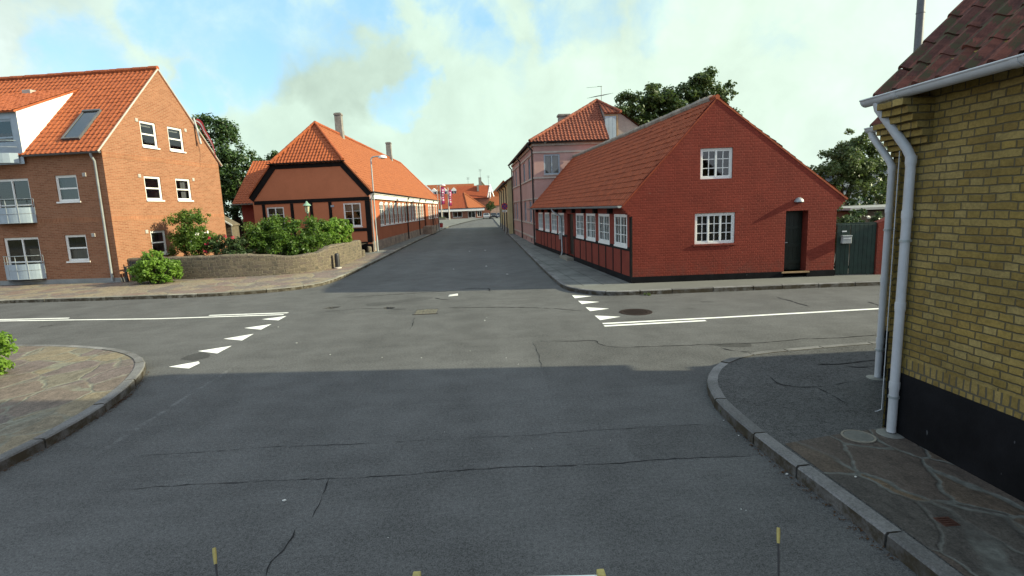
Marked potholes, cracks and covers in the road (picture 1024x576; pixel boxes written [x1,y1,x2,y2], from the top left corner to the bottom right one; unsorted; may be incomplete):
crack [769,360,875,404]
crack [266,530,295,575]
crack [145,423,712,456]
crack [107,456,731,492]
